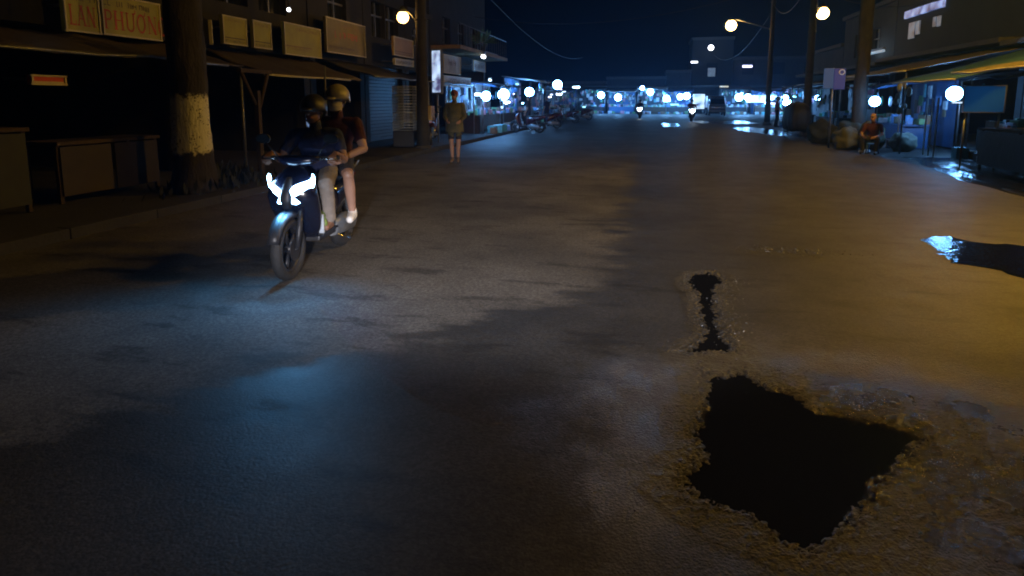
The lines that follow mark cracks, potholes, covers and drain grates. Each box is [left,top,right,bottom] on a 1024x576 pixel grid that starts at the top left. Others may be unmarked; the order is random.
pothole [631,354,1024,576]
pothole [657,268,766,364]
